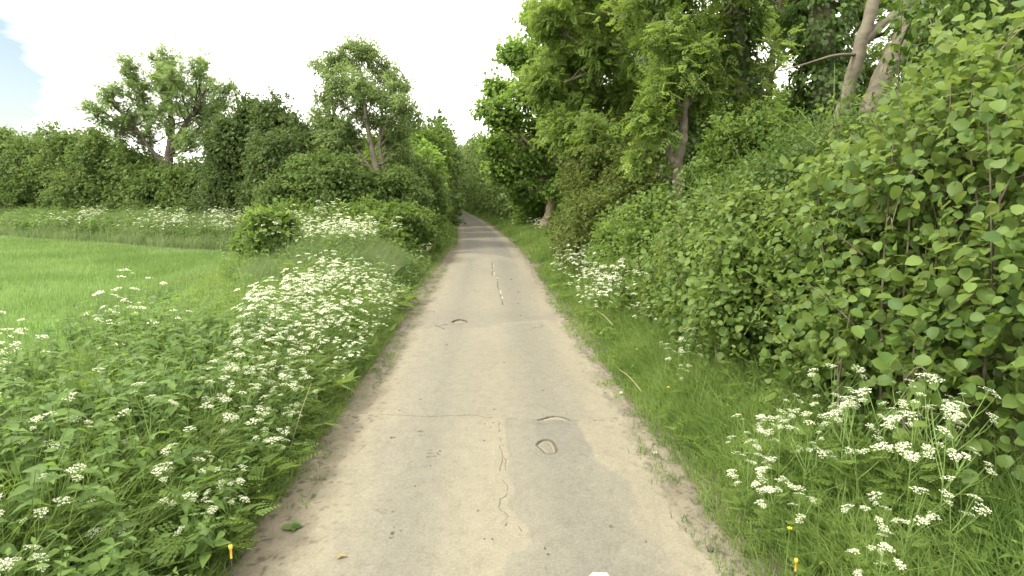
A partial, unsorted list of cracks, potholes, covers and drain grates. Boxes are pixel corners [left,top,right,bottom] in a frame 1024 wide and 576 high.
pothole [528,436,565,458]
crack [374,412,613,538]
